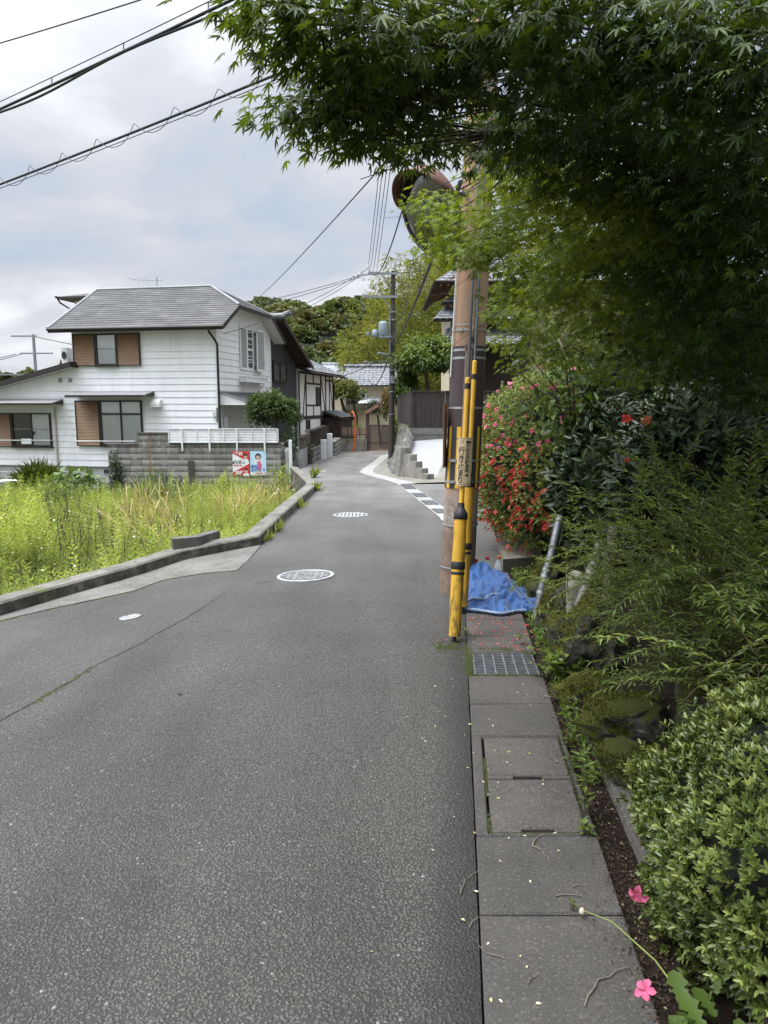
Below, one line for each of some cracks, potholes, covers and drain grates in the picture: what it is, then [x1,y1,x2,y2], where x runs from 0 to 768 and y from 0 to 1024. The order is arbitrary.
drain grate [472,654,540,676]
crack [0,592,225,721]
manhole cover [277,569,334,582]
utility cover [484,738,571,783]
utility cover [487,780,588,833]
